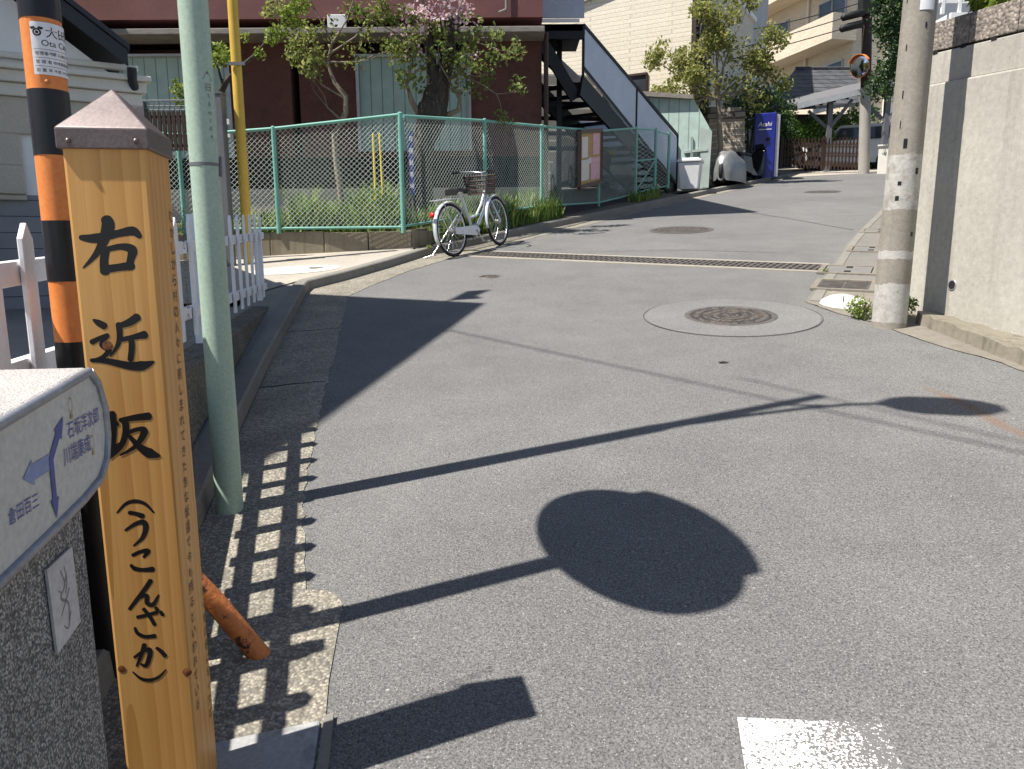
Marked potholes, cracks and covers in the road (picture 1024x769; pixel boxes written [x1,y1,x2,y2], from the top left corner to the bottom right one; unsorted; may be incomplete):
manhole cover [643,299,824,337]
drain grate [467,250,828,273]
